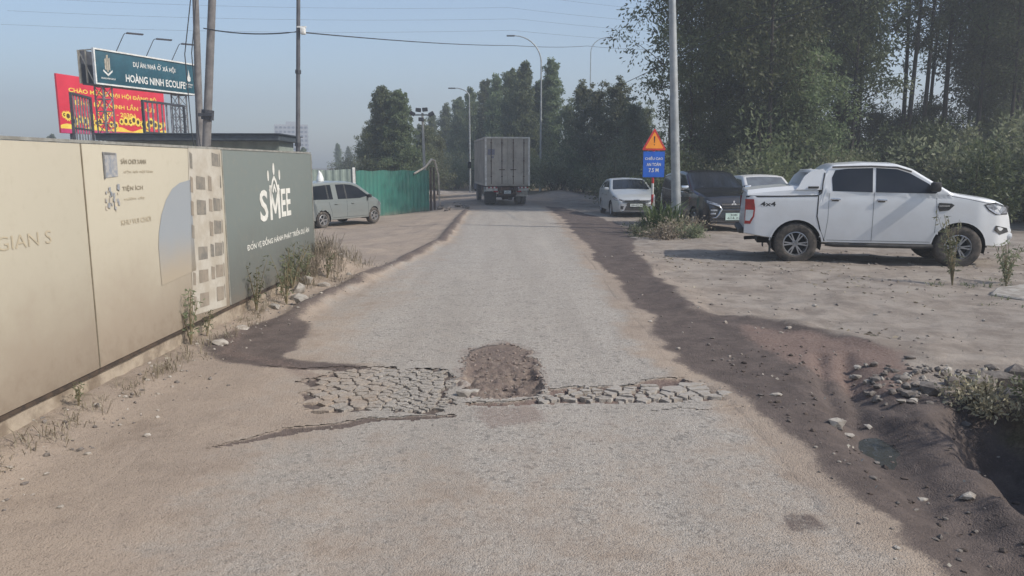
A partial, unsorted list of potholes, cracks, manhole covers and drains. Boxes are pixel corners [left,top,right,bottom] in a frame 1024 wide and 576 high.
pothole [449,342,551,405]
